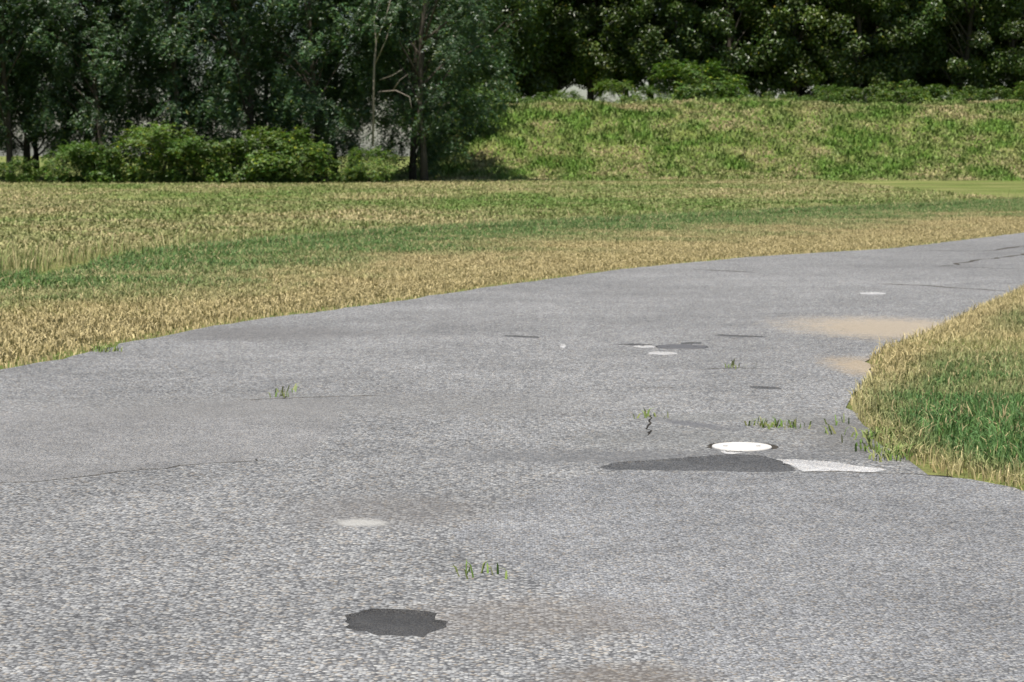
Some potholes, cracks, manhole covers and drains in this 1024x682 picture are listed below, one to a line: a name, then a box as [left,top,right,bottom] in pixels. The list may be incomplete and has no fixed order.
manhole cover [707,442,778,452]
crack [931,246,1024,268]
